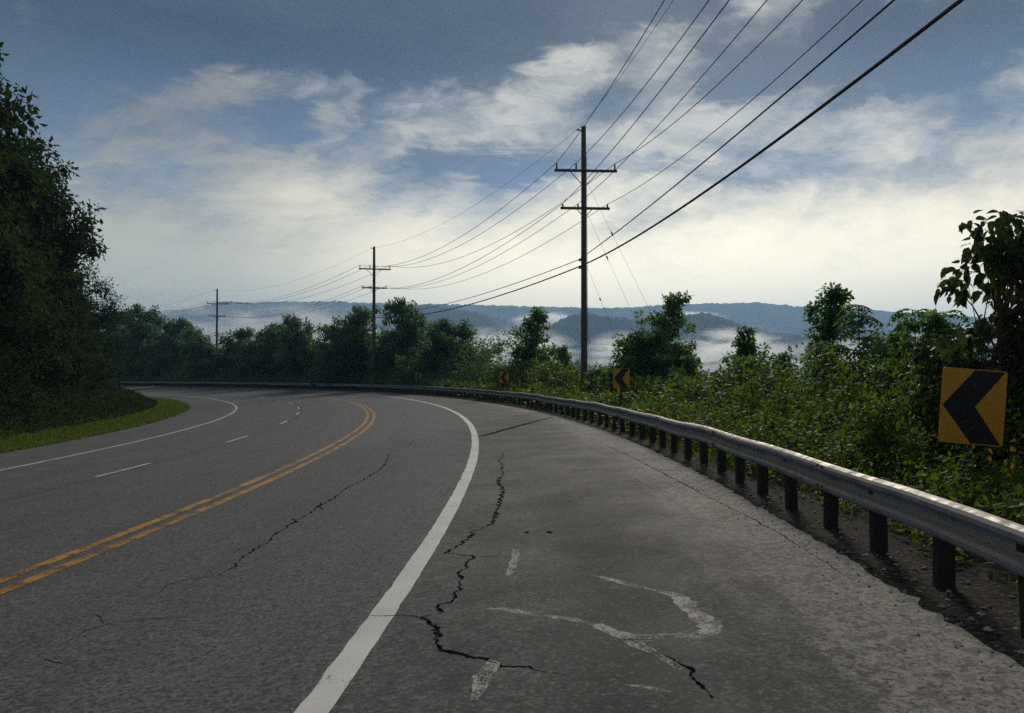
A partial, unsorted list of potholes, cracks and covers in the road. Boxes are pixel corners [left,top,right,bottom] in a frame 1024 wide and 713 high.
crack [395,453,723,709]
crack [42,442,413,651]
